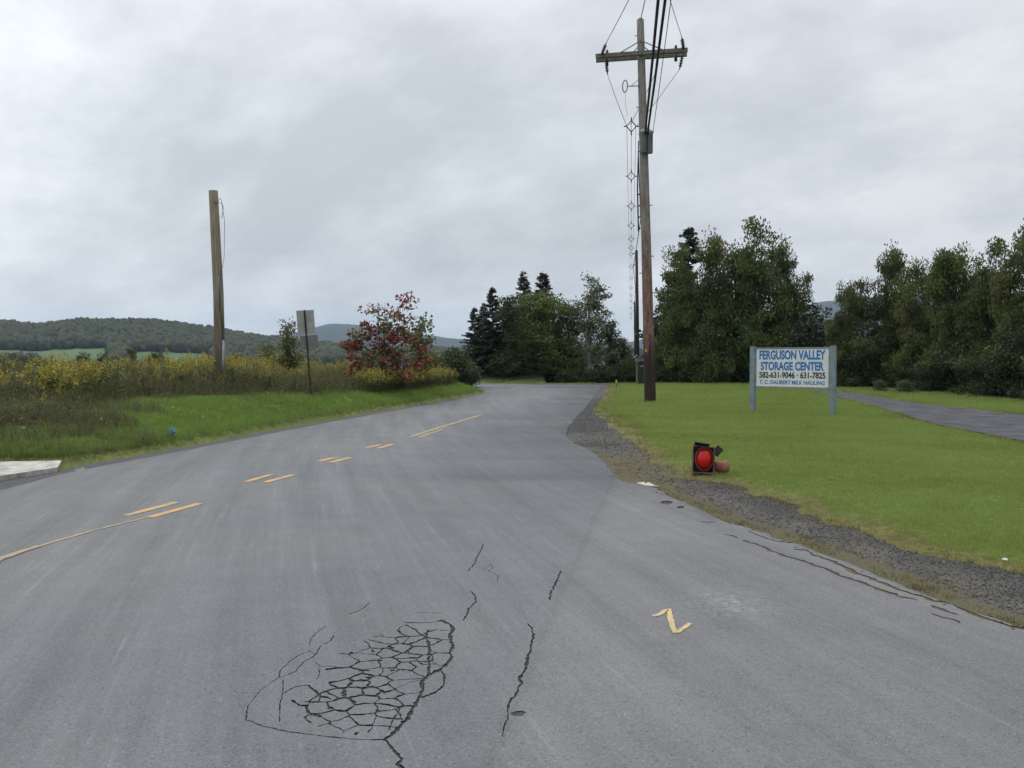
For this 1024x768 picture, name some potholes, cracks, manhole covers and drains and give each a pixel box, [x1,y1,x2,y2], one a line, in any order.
crack [245,591,477,768]
crack [502,623,535,737]
crack [701,520,1024,629]
